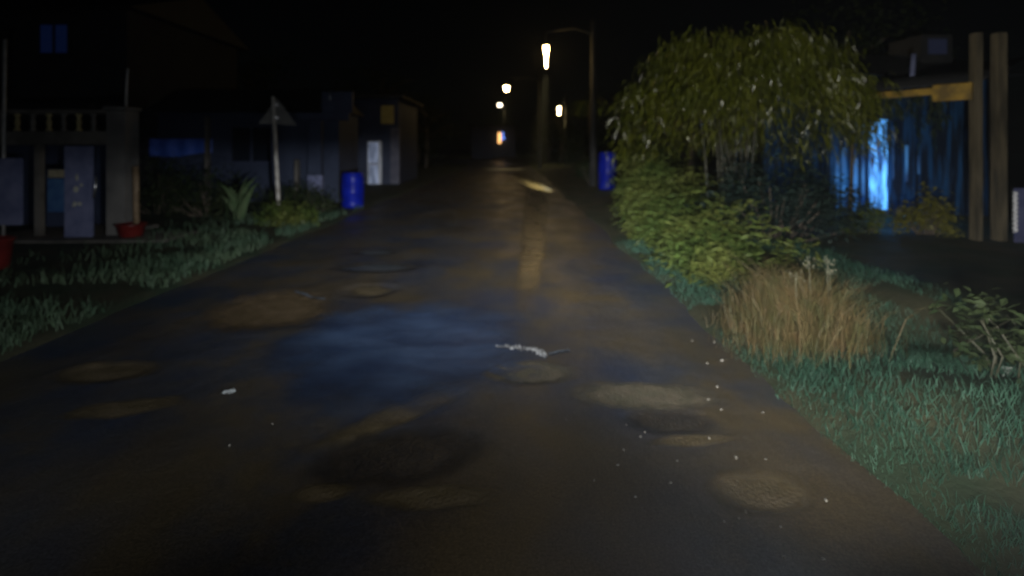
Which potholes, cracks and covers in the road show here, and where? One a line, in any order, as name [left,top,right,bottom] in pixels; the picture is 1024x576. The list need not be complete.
pothole [333,263,417,272]
pothole [630,410,711,432]
pothole [315,431,478,484]
